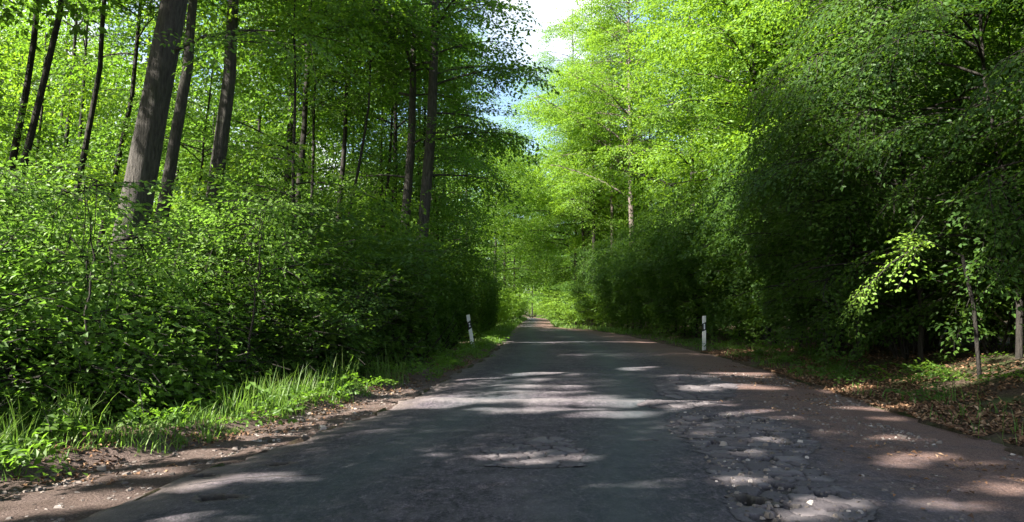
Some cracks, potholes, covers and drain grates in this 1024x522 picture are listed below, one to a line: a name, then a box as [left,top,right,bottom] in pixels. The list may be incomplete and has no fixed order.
crack [637,375,880,522]
pothole [725,493,783,508]
